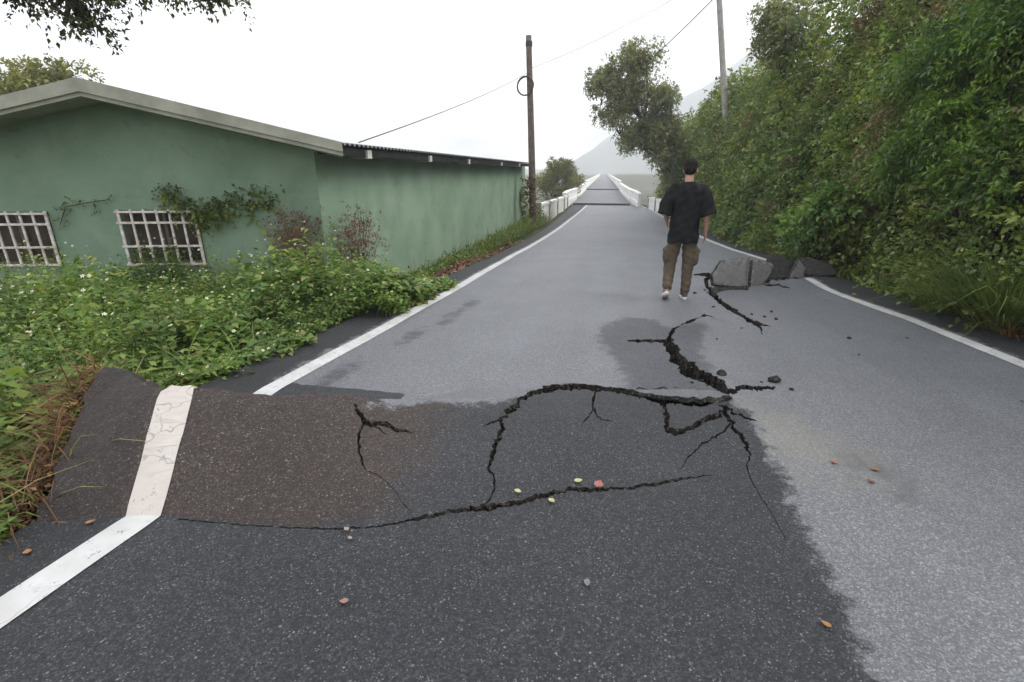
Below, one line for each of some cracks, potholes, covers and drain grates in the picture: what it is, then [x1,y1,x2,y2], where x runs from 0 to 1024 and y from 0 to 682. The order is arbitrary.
crack [178,273,789,540]
